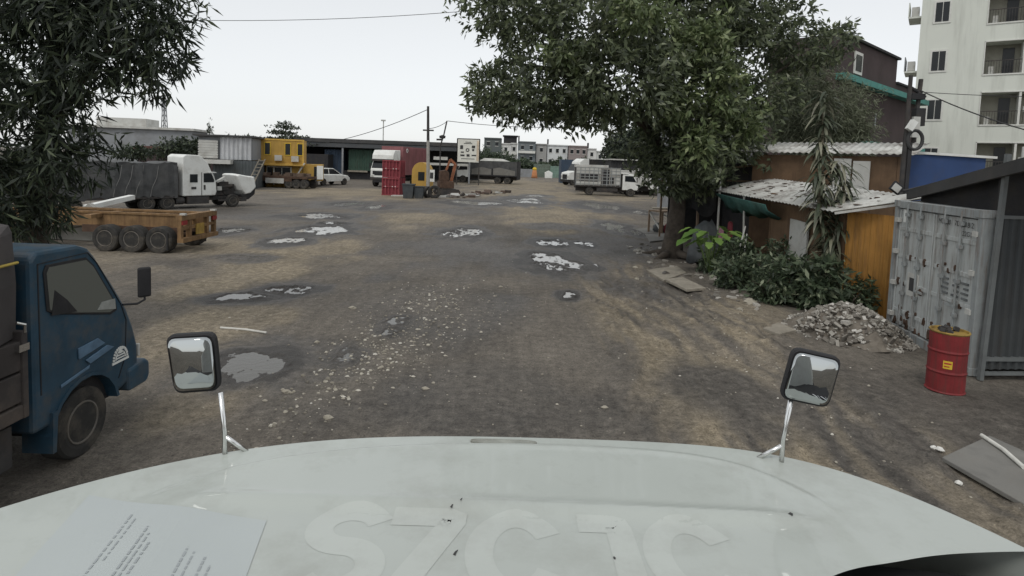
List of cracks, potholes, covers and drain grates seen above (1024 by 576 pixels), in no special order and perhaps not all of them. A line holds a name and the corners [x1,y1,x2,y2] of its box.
pothole [514,247,610,281]
pothole [559,289,580,301]
pothole [324,340,363,370]
pothole [570,240,600,249]
pothole [425,226,496,242]
pothole [376,326,405,339]
pothole [525,237,579,250]
pothole [485,197,557,207]
pothole [210,342,316,403]
pothole [193,291,283,304]
pothole [379,314,412,328]
pothole [249,236,317,246]
